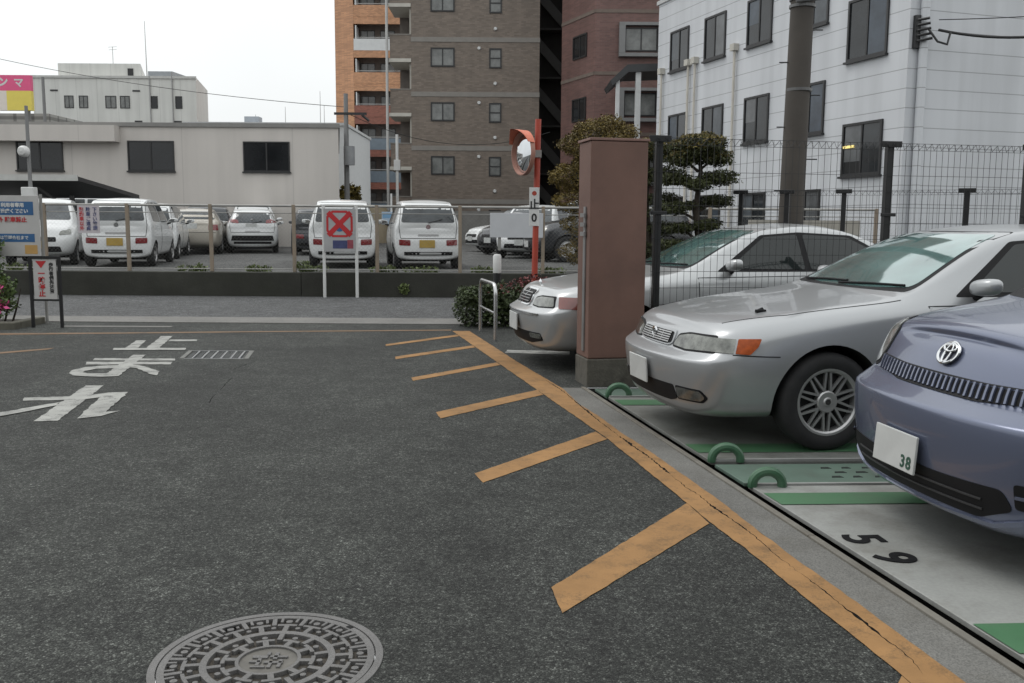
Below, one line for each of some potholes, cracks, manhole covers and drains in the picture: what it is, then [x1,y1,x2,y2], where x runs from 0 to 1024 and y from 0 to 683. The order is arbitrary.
manhole cover [146,612,383,683]
